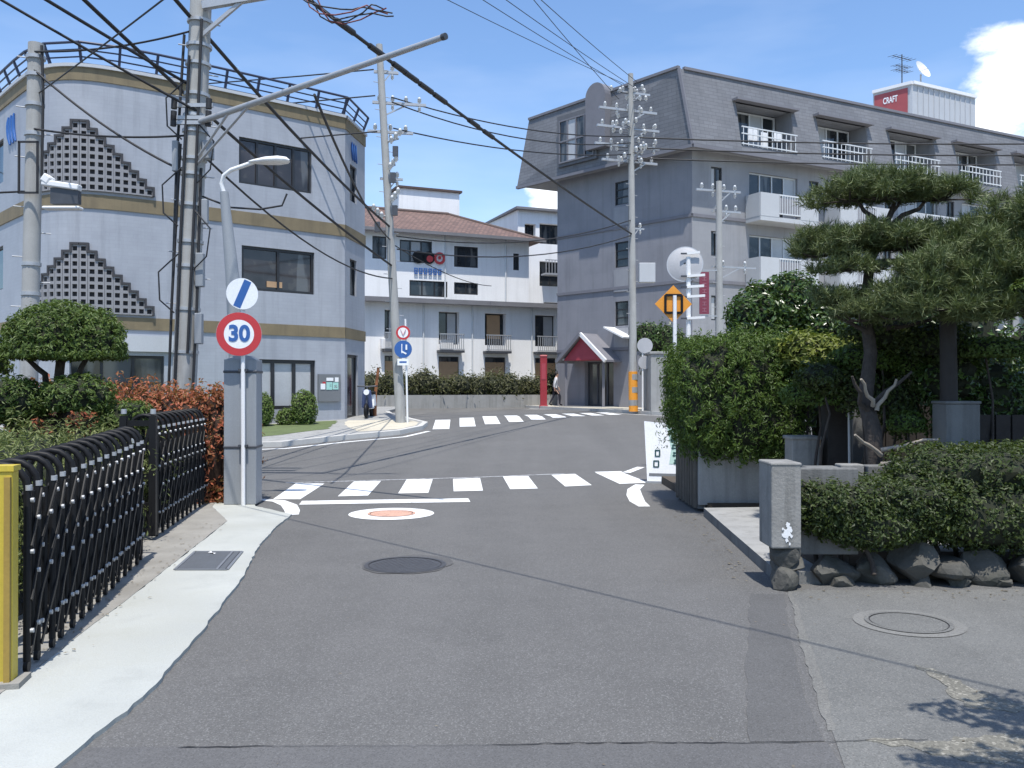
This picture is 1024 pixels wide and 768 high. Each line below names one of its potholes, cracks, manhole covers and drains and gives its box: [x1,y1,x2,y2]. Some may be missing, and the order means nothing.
manhole cover [362,555,453,574]
manhole cover [853,610,967,637]
